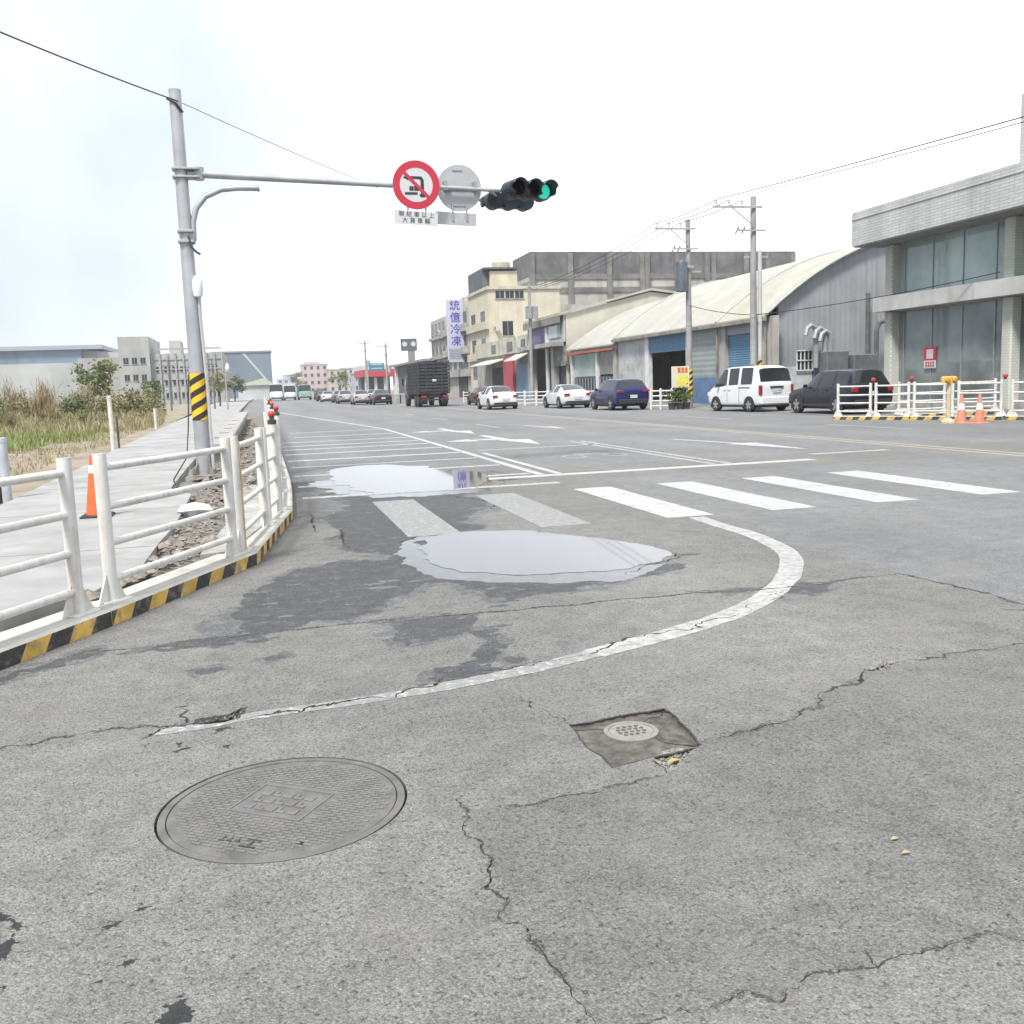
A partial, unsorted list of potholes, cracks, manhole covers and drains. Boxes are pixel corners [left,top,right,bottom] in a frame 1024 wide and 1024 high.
crack [703,643,1020,742]
crack [644,932,1024,1024]
manhole cover [154,757,407,864]
crack [337,528,350,549]
pothole [194,707,248,725]
crack [456,761,667,1024]
